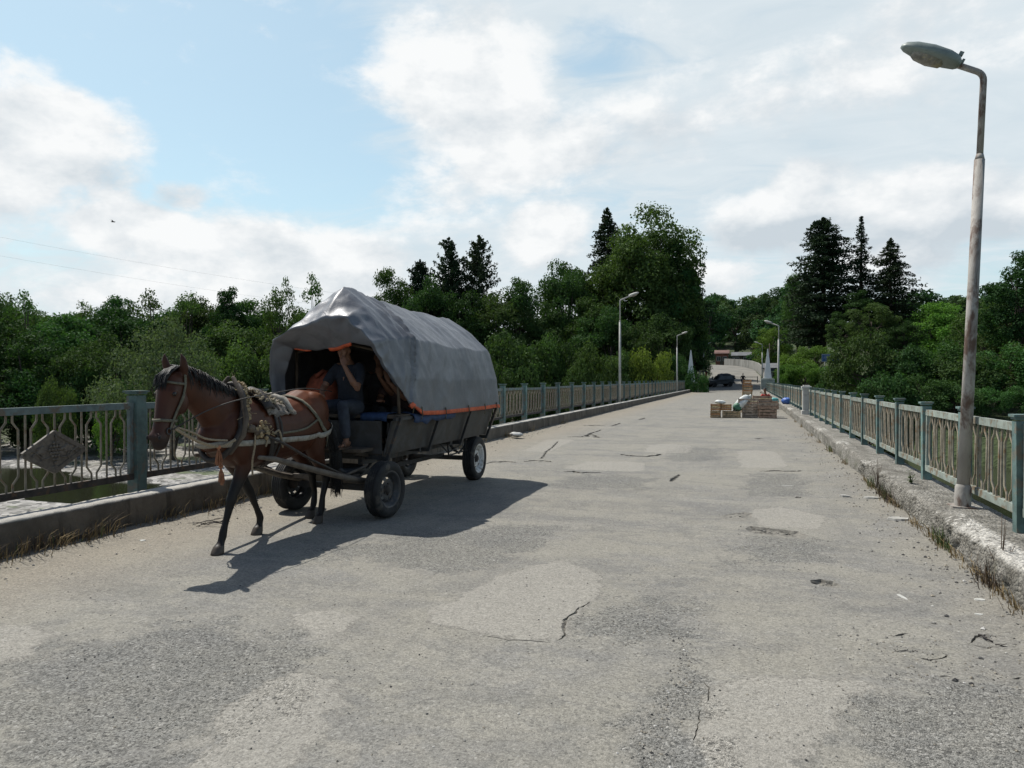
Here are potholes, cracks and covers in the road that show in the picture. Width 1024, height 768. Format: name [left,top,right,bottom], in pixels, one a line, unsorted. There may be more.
pothole [745,526,809,539]
crack [484,602,589,643]
crack [486,423,620,473]
pothole [810,579,841,589]
crack [692,681,710,742]
